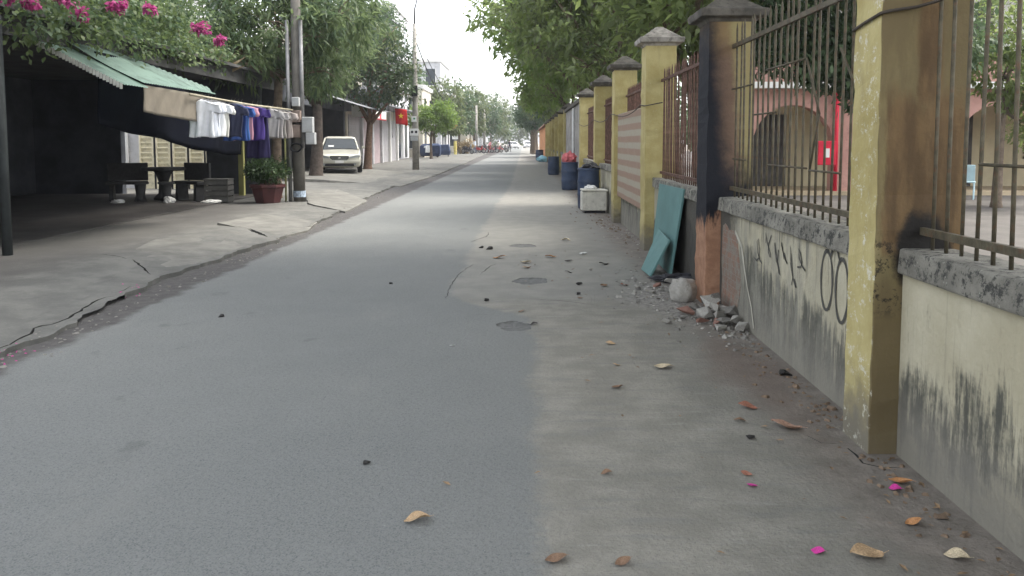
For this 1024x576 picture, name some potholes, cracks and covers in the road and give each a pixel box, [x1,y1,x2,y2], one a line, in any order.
crack [808,436,905,468]
crack [0,296,116,348]
